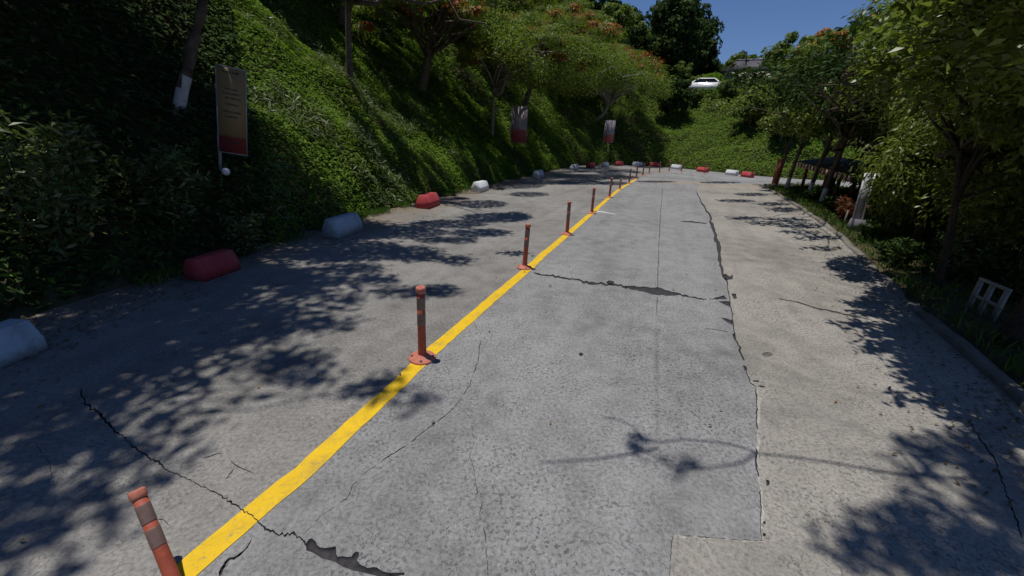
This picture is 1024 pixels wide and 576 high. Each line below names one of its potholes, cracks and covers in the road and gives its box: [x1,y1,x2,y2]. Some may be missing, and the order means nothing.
crack [534,191,770,540]
crack [80,342,488,576]
crack [966,420,1022,538]
crack [779,298,870,320]
